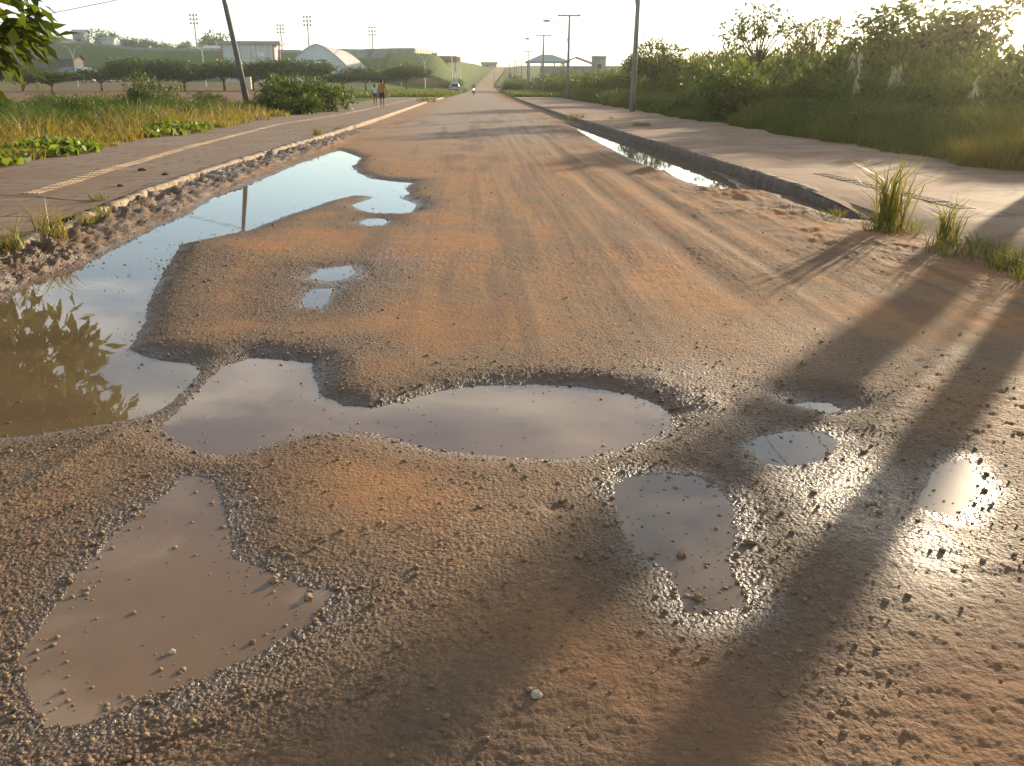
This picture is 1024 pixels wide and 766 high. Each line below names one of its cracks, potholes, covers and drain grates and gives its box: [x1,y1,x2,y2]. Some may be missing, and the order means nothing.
pothole [349,214,399,226]
pothole [581,461,788,631]
pothole [722,423,854,471]
pothole [294,263,365,284]
pothole [0,462,362,758]
pothole [291,284,348,310]
pothole [138,347,708,467]
pothole [746,376,897,424]
